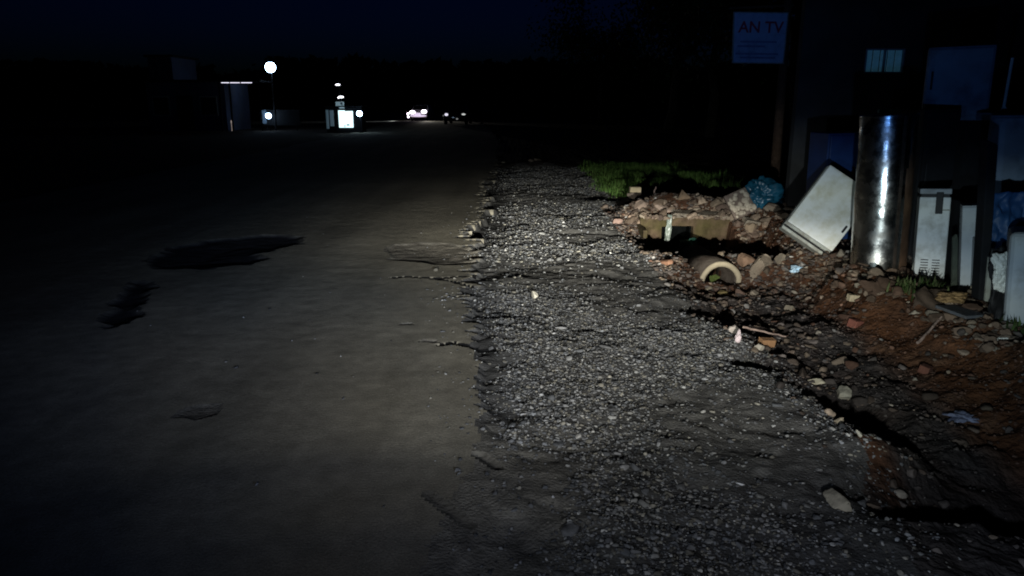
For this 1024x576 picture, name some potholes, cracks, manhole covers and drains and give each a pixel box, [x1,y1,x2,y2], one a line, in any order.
pothole [96,280,162,330]
pothole [171,403,224,421]
pothole [141,234,305,272]
crack [389,275,476,298]
crack [436,341,498,353]
